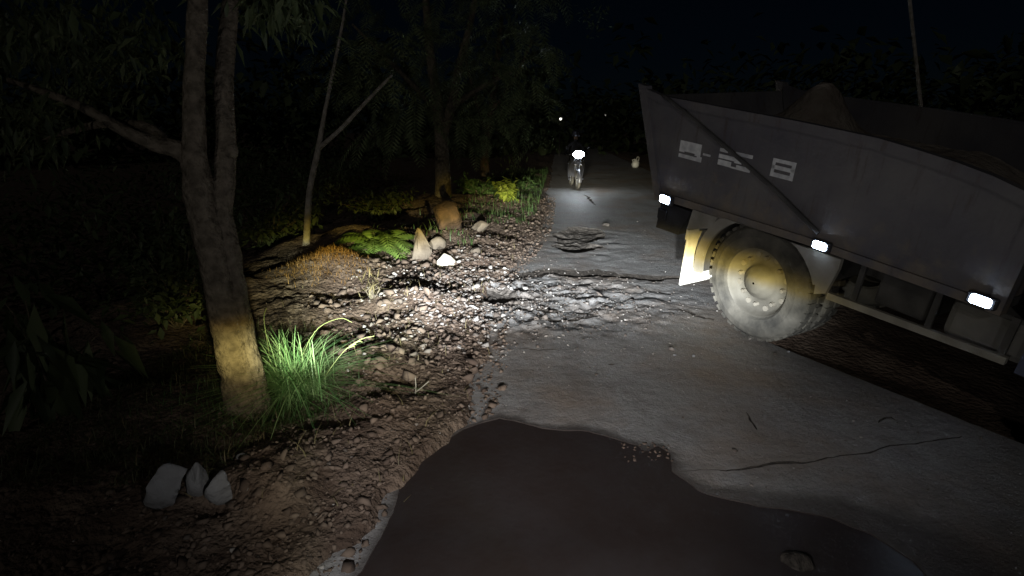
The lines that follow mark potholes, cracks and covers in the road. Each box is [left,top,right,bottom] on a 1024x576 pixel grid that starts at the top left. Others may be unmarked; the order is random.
pothole [482,287,522,304]
pothole [551,226,607,253]
crack [677,412,962,472]
pothole [357,418,927,576]
